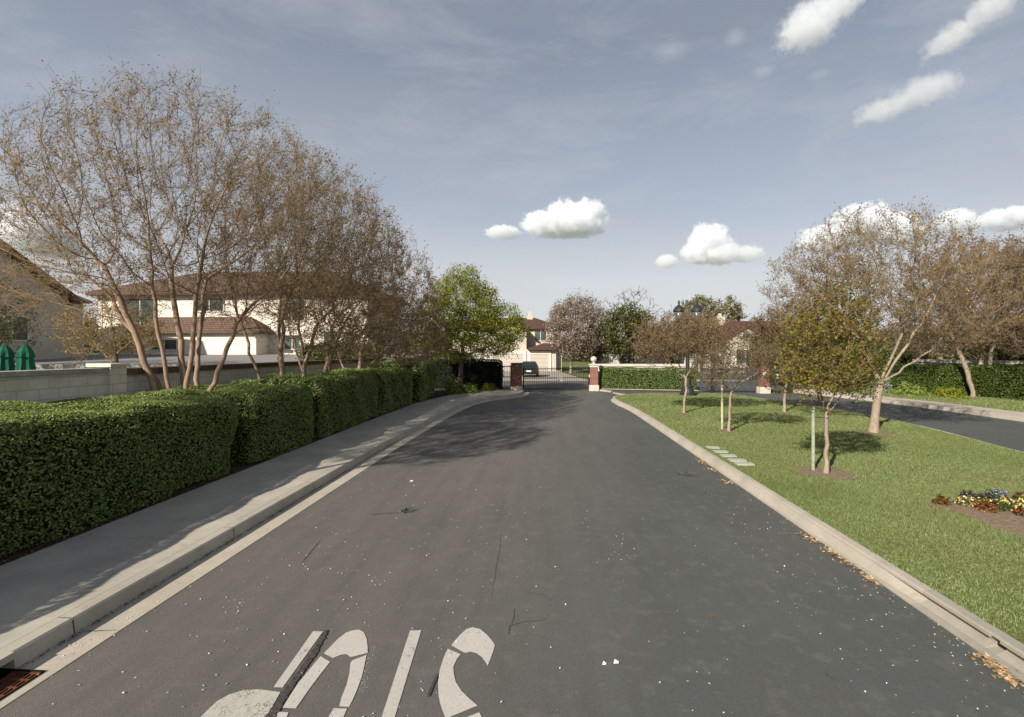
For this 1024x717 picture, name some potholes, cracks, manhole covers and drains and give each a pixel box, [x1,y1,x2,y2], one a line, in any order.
drain grate [0,671,41,698]
